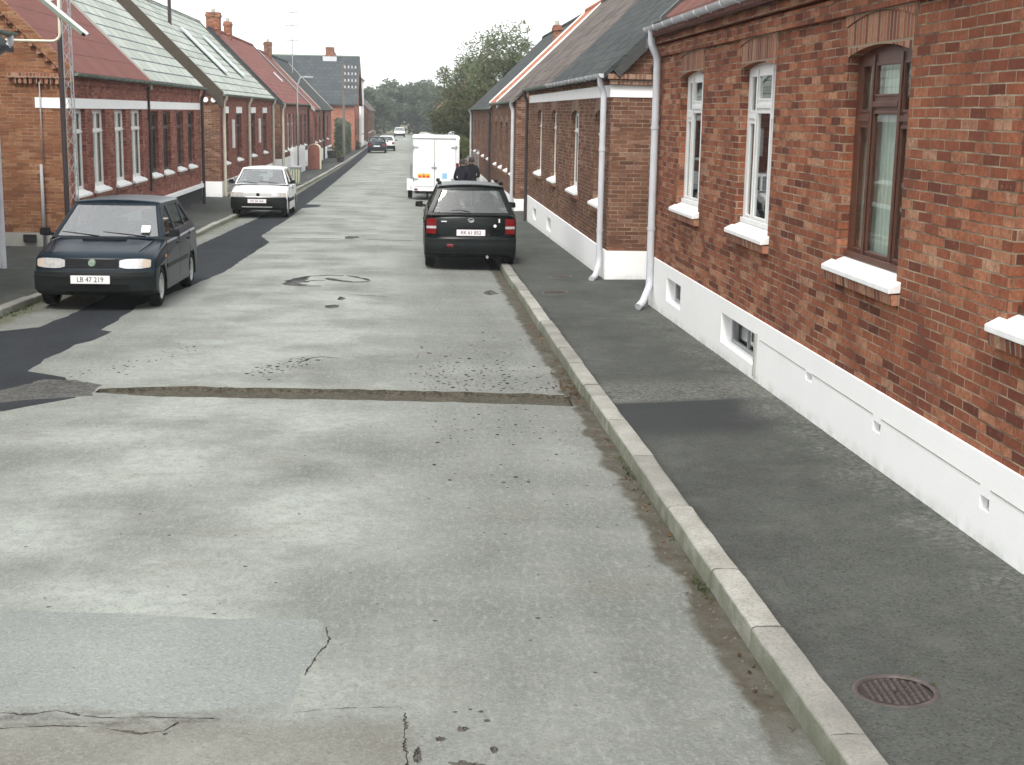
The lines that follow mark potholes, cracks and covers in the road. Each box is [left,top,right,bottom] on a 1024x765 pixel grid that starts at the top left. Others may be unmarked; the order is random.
crack [294,706,409,765]
pothole [282,275,371,286]
crack [305,627,346,675]
manhole cover [852,674,940,708]
crack [0,710,219,735]
pothole [413,746,422,765]
